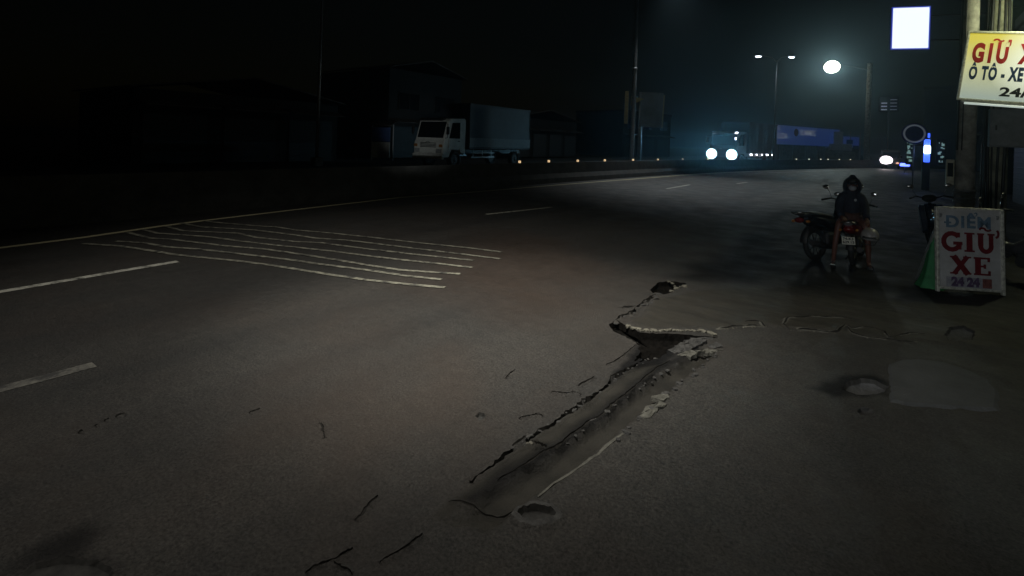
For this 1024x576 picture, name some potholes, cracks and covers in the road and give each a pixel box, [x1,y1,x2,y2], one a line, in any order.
crack [447,344,722,525]
crack [316,422,328,439]
crack [304,547,357,576]
pothole [836,376,891,400]
crack [76,413,127,434]
pothole [508,499,568,532]
crack [352,495,426,566]
crack [716,315,928,344]
